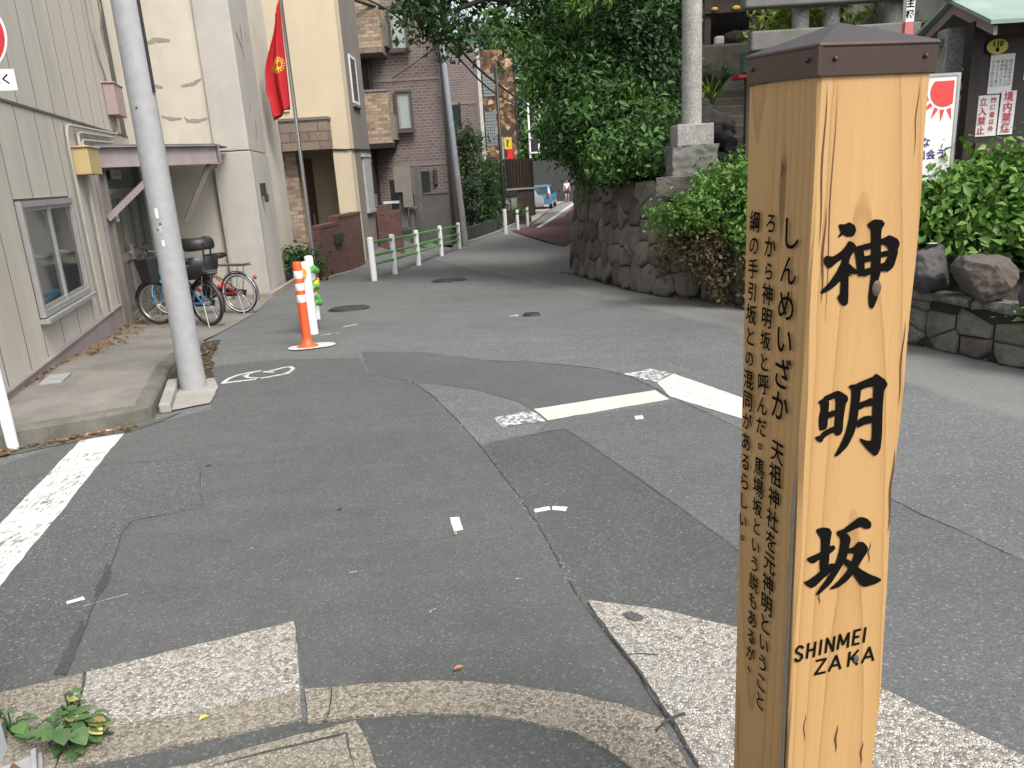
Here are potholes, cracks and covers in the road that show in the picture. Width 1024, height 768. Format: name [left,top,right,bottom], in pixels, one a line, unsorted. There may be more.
manhole cover [328,304,371,312]
